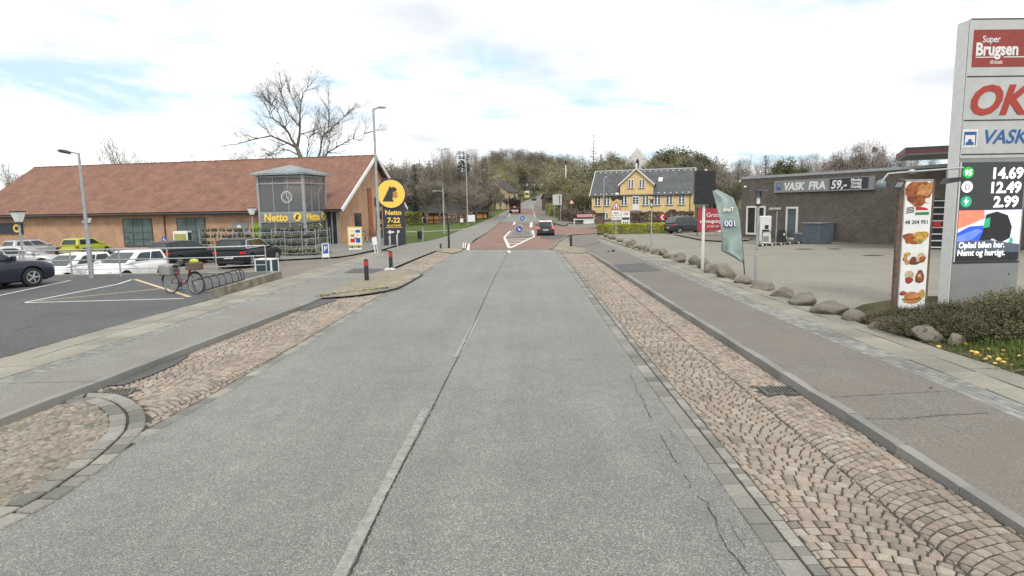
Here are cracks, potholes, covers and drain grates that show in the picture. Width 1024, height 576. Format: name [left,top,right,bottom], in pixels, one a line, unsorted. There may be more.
crack [630,373,750,576]
drain grate [757,386,801,395]
